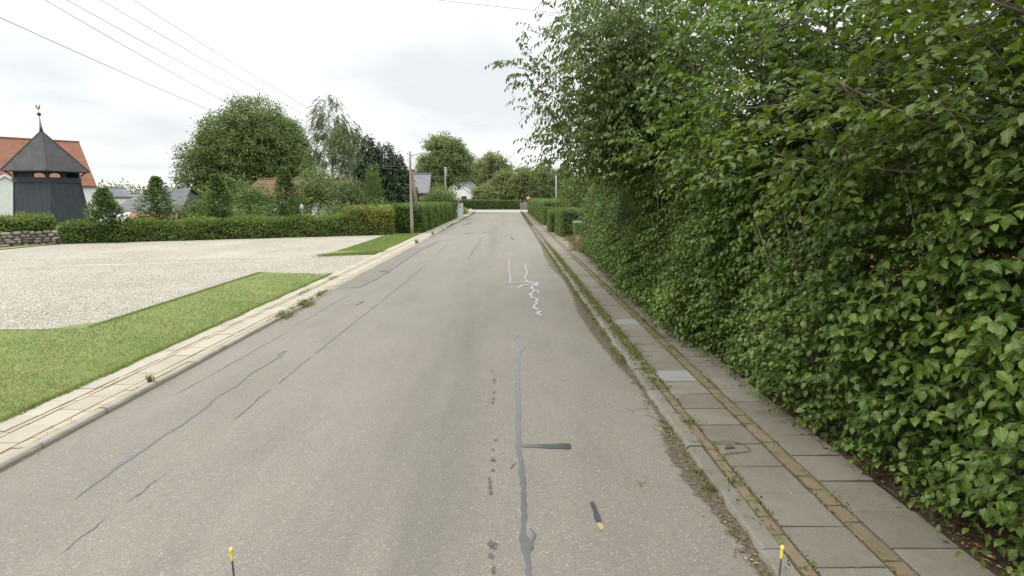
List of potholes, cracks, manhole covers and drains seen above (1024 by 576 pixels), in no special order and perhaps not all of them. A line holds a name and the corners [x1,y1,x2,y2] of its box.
crack [62,222,486,553]
